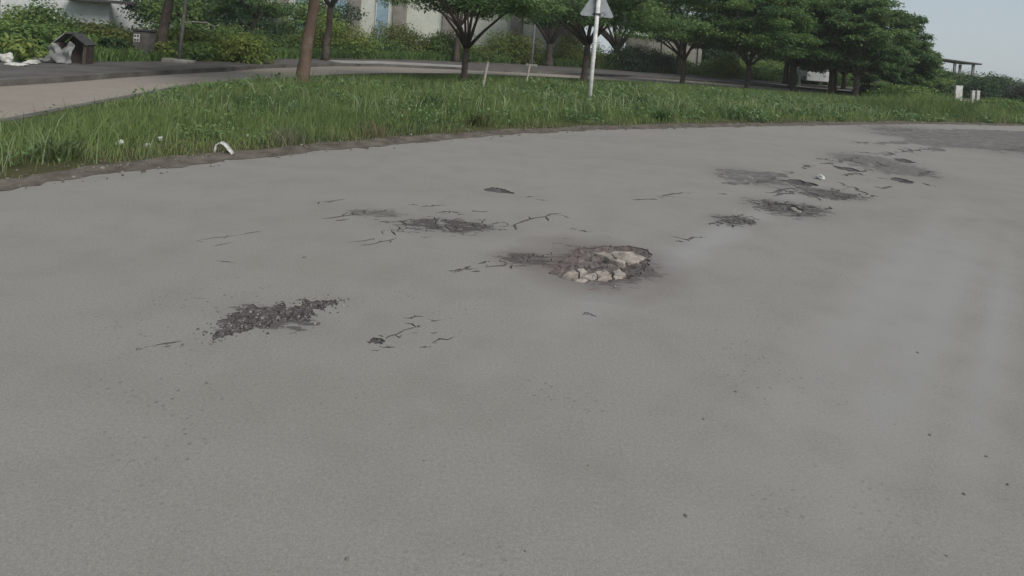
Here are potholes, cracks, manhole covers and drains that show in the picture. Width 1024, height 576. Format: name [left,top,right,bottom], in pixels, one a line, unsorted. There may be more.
pothole [548,245,655,287]
pothole [717,169,793,185]
pothole [763,203,803,212]
crack [669,141,939,242]
pothole [181,293,349,346]
crack [373,315,453,351]
pothole [780,179,818,187]
crack [318,192,725,245]
